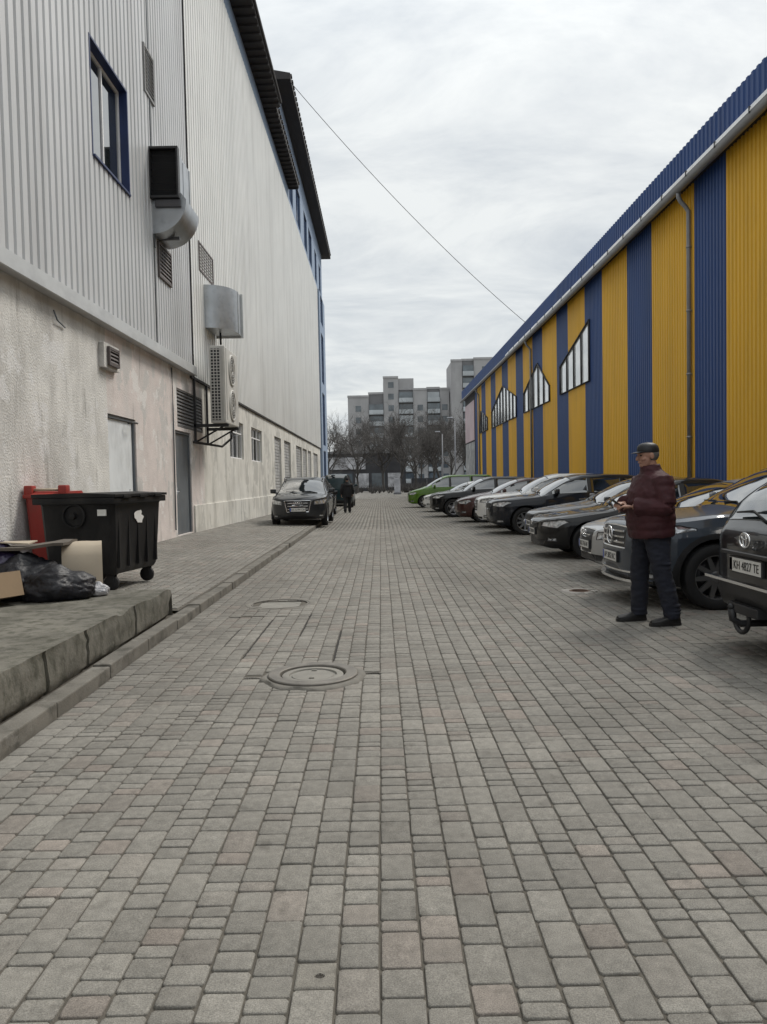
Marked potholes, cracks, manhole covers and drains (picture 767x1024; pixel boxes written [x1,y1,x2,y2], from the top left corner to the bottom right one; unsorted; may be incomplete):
manhole cover [260,662,366,692]
manhole cover [245,598,316,610]
